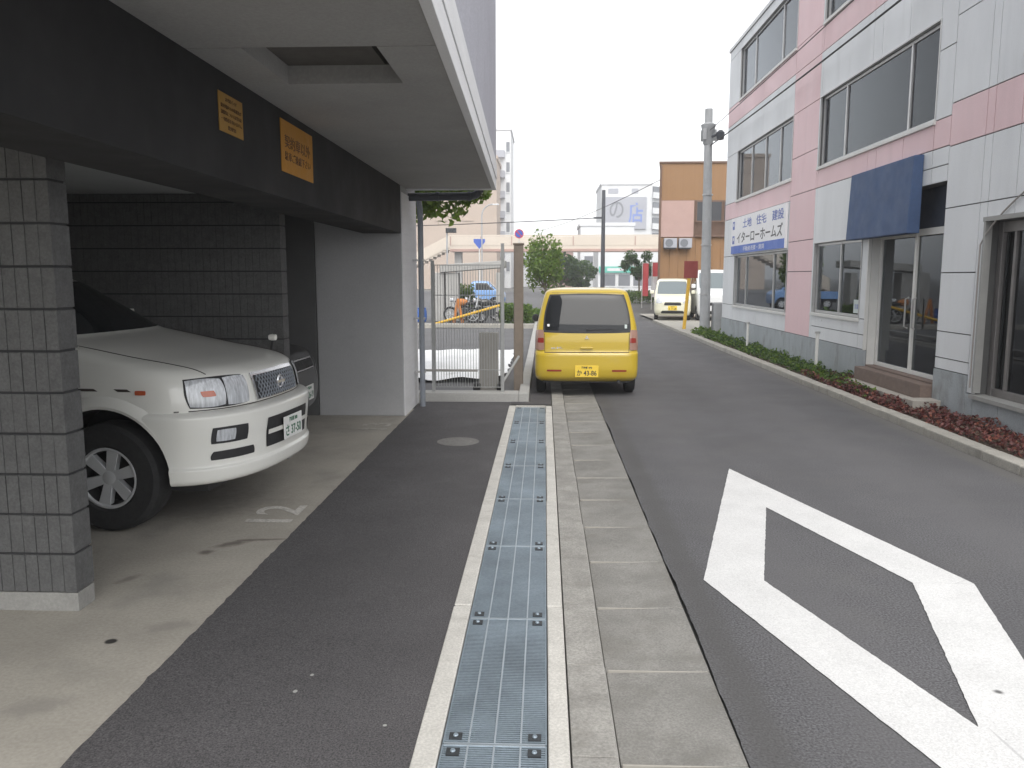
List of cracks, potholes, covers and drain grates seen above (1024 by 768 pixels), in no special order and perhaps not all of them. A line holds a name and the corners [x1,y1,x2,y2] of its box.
drain grate [442,618,547,747]
drain grate [437,744,547,768]
drain grate [513,407,545,423]
drain grate [503,441,546,466]
drain grate [509,422,546,442]
drain grate [470,546,546,620]
manhole cover [437,437,479,446]
drain grate [486,499,546,547]
drain grate [496,466,546,499]
